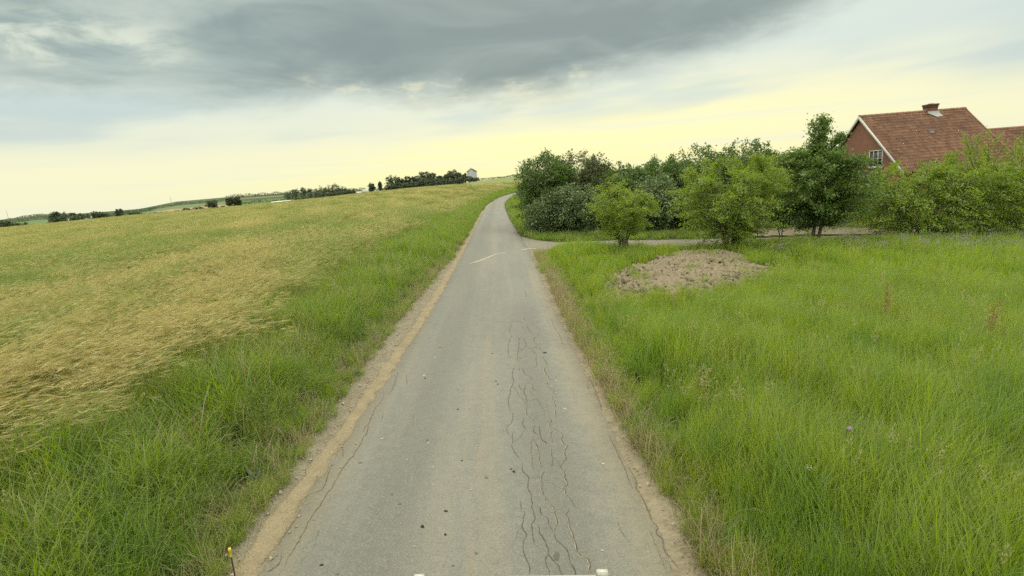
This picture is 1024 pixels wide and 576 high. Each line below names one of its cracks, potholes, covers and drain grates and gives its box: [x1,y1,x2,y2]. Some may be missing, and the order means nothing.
crack [269,372,407,575]
crack [506,298,593,576]
